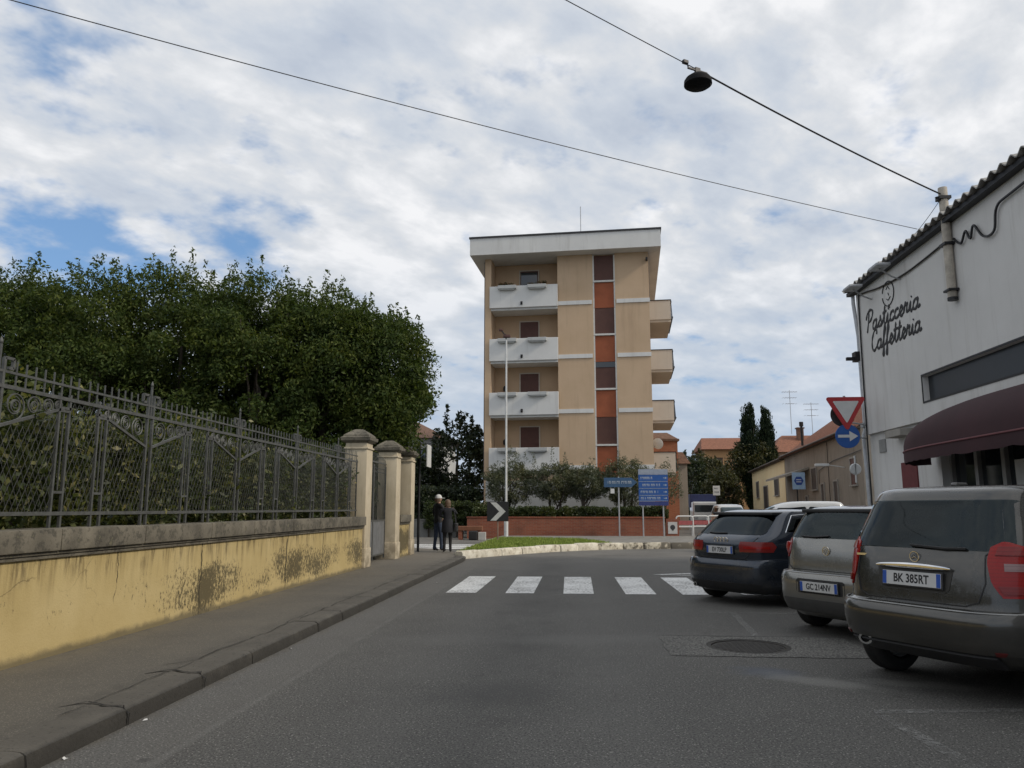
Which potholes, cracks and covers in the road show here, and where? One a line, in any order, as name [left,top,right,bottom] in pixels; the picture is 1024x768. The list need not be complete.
manhole cover [707,640,791,654]
